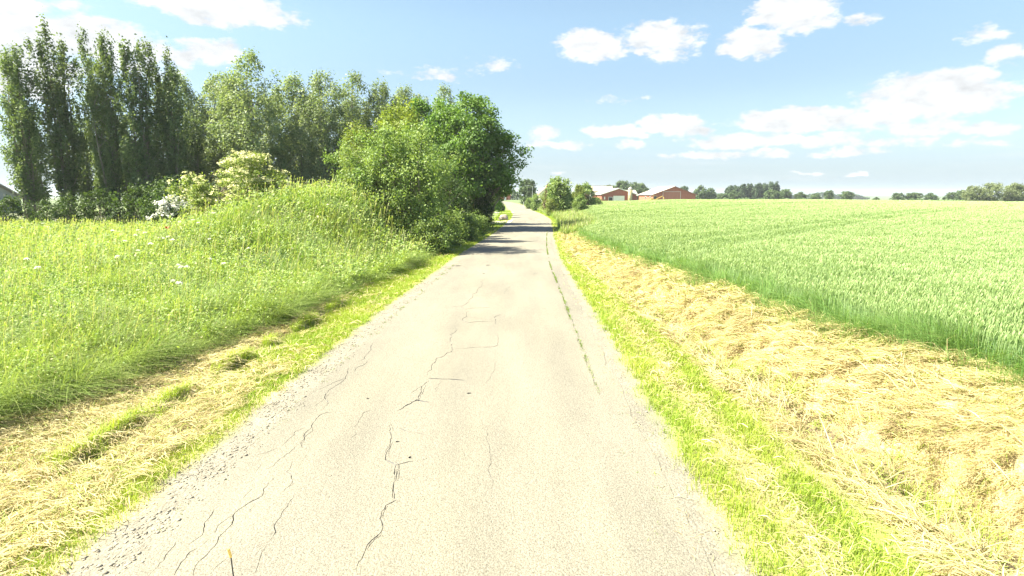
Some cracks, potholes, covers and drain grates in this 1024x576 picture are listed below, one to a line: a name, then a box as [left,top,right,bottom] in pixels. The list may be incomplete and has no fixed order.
crack [356,279,499,575]
crack [151,345,372,576]
